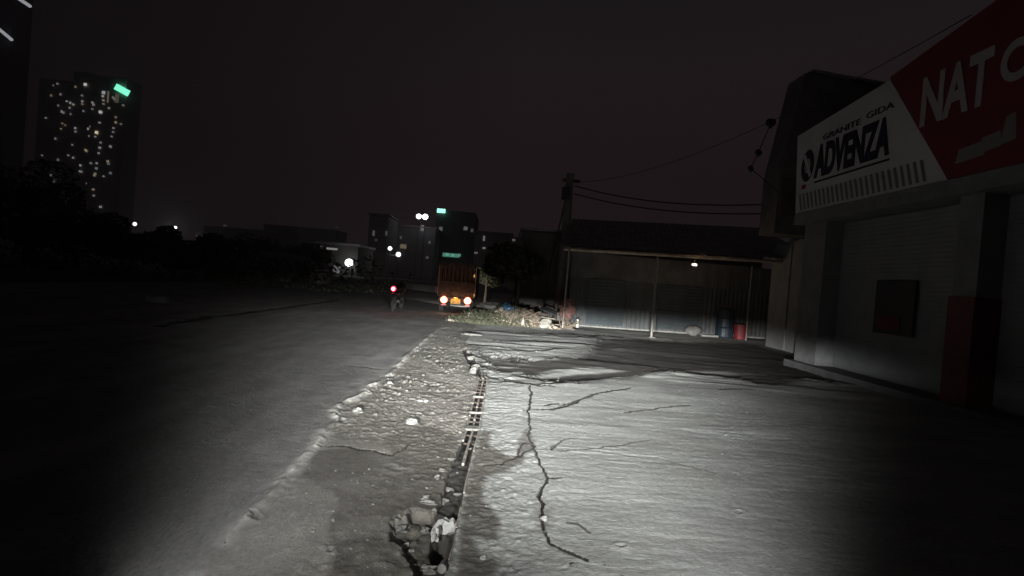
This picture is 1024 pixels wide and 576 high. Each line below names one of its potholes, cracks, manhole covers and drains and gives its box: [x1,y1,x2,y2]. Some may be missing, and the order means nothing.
pothole [385,506,449,575]
crack [317,443,411,456]
crack [483,381,691,562]
